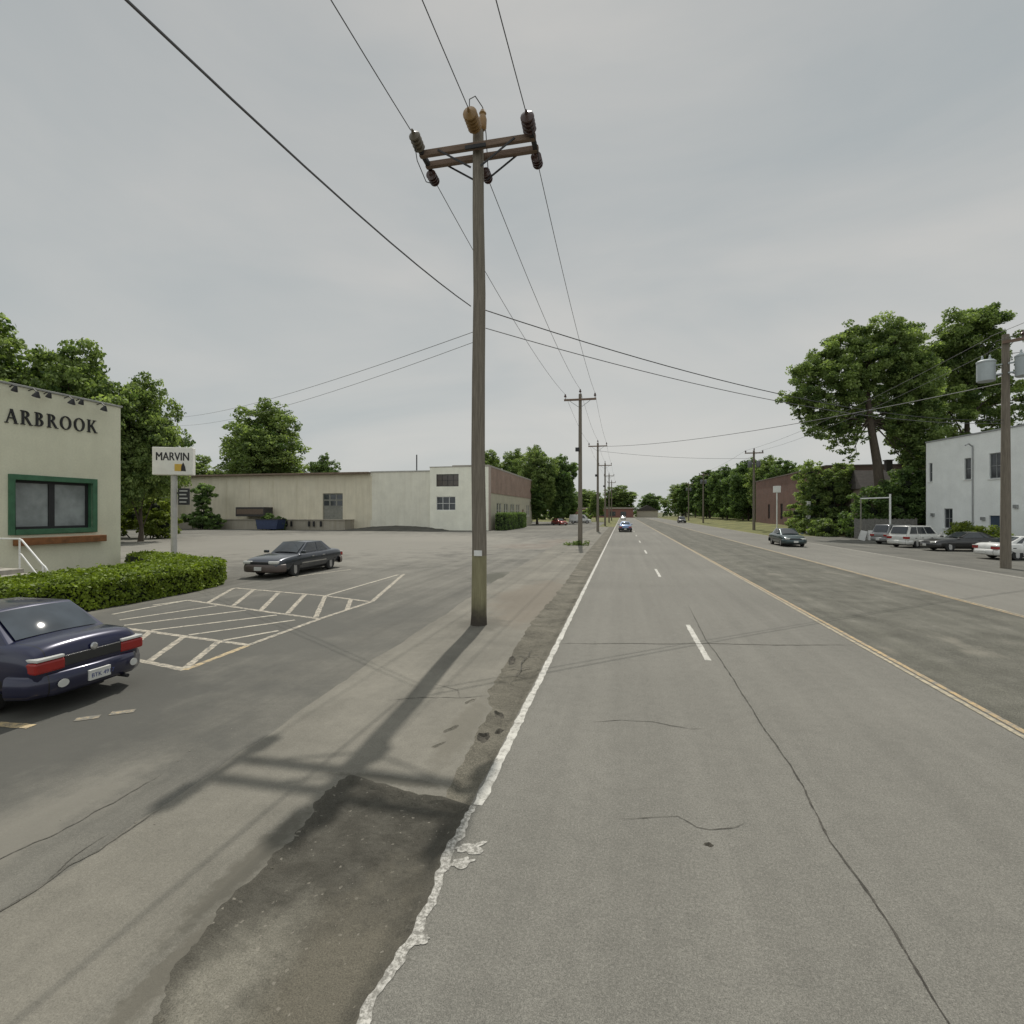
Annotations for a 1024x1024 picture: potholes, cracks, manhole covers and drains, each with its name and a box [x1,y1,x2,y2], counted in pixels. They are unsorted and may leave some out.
crack [0,777,157,859]
pothole [477,732,490,743]
crack [620,816,747,830]
